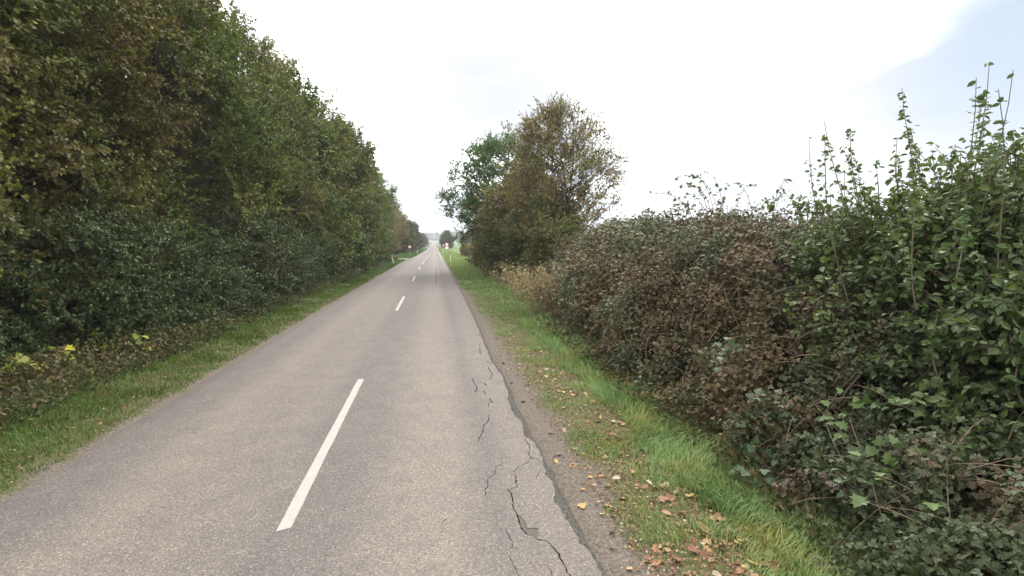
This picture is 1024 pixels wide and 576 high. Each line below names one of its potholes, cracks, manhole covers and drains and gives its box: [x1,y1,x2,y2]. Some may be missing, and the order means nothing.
crack [472,335,571,576]
